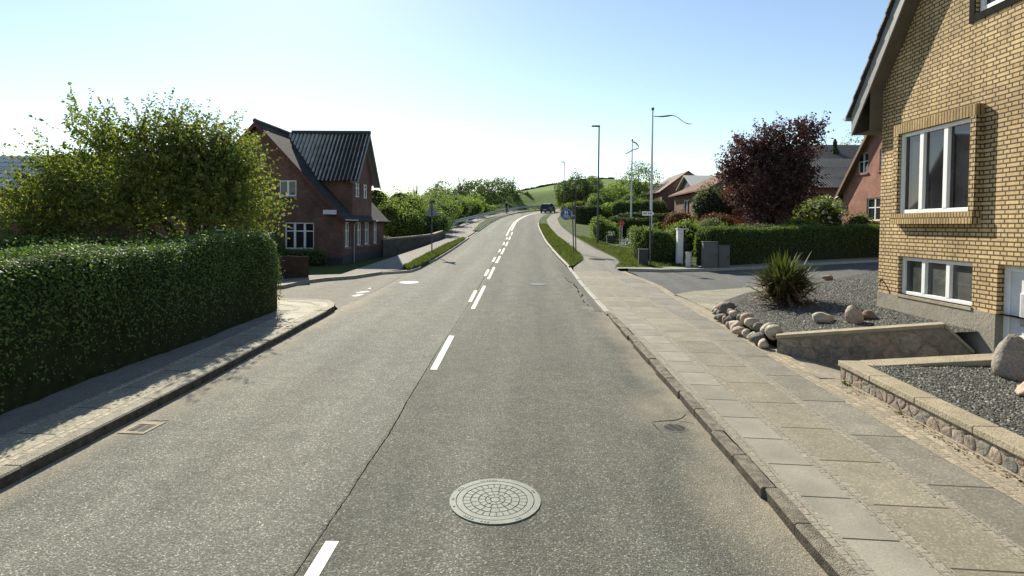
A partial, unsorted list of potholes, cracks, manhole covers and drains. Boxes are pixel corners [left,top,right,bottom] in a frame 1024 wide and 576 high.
drain grate [118,421,166,434]
drain grate [662,423,688,432]
manhole cover [449,479,541,525]
